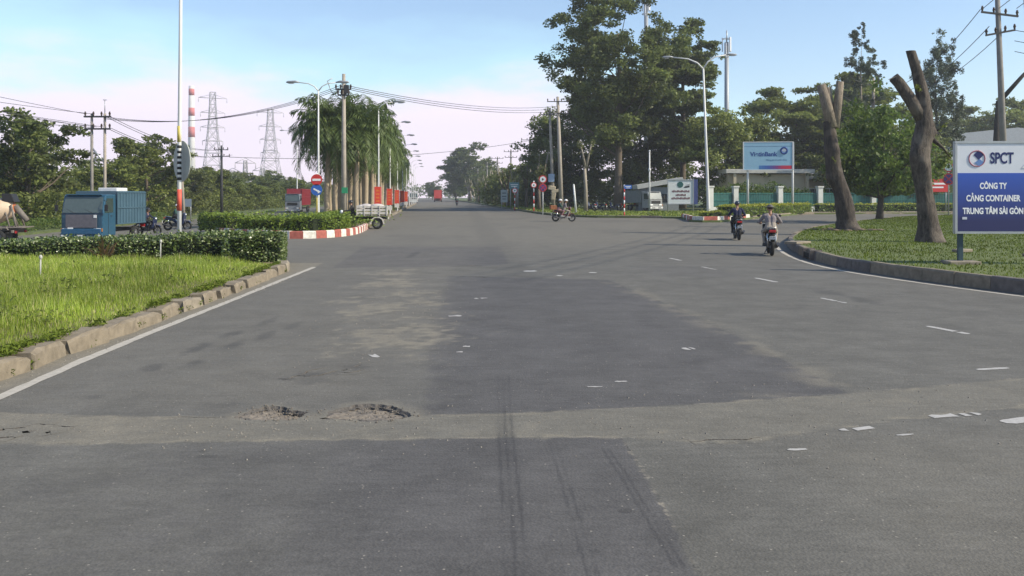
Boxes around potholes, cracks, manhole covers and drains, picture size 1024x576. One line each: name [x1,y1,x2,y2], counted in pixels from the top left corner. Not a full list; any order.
crack [0,421,80,442]
pothole [217,402,328,425]
pothole [297,400,428,427]
crack [687,435,766,445]
